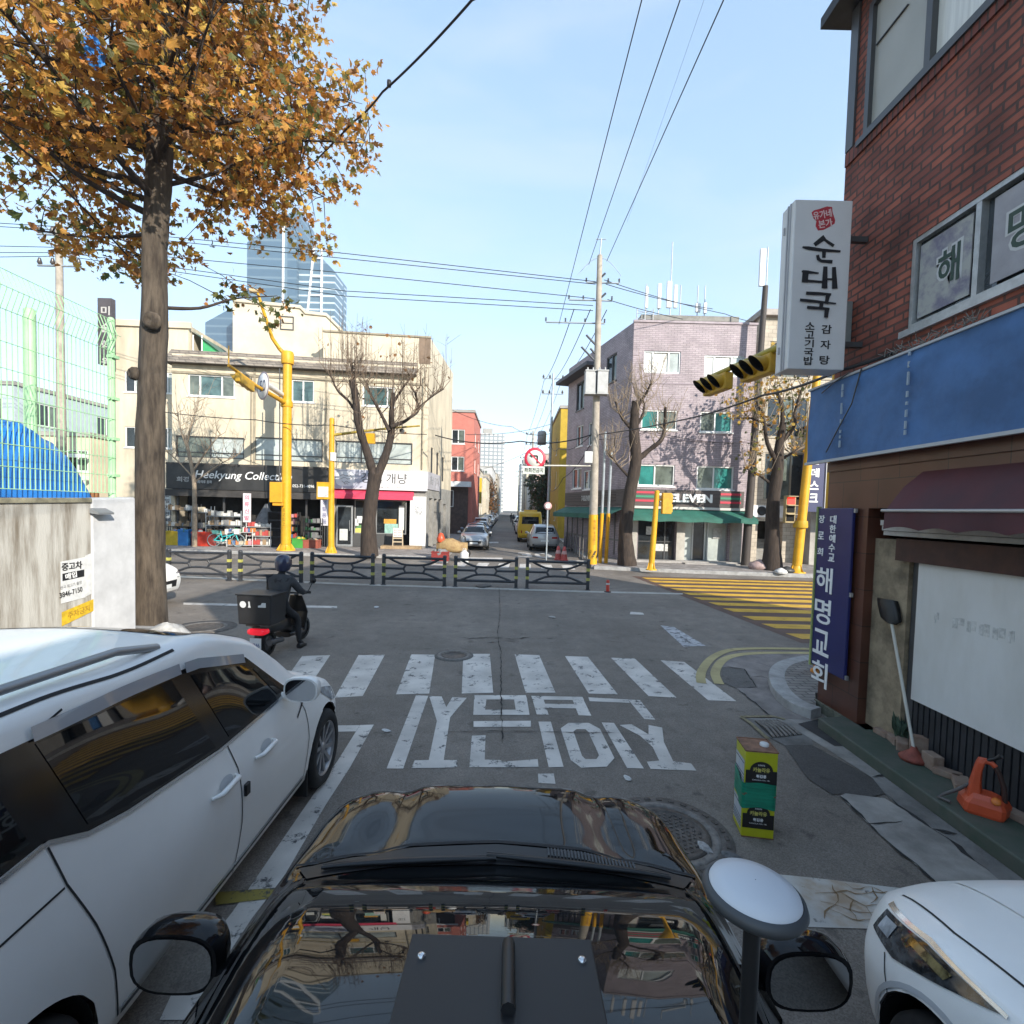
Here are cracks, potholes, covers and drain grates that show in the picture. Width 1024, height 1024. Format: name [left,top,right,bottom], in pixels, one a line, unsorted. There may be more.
manhole cover [434,650,473,662]
manhole cover [628,796,736,878]
crack [466,595,527,743]
drain grate [739,715,802,738]
manhole cover [182,620,237,633]
